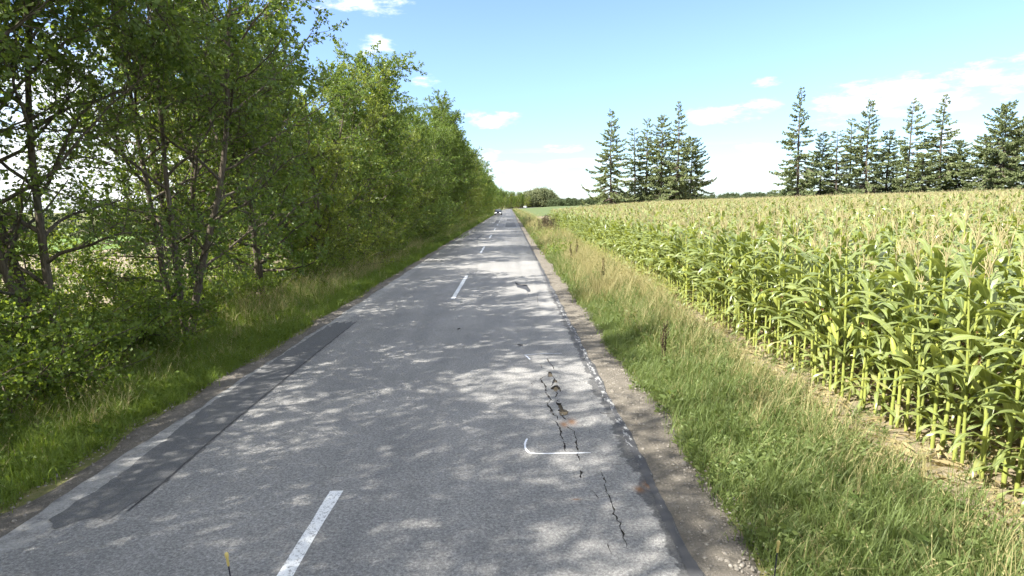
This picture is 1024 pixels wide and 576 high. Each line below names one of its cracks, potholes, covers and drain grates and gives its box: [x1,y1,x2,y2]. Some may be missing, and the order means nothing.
crack [531,359,610,478]
crack [596,464,627,552]
